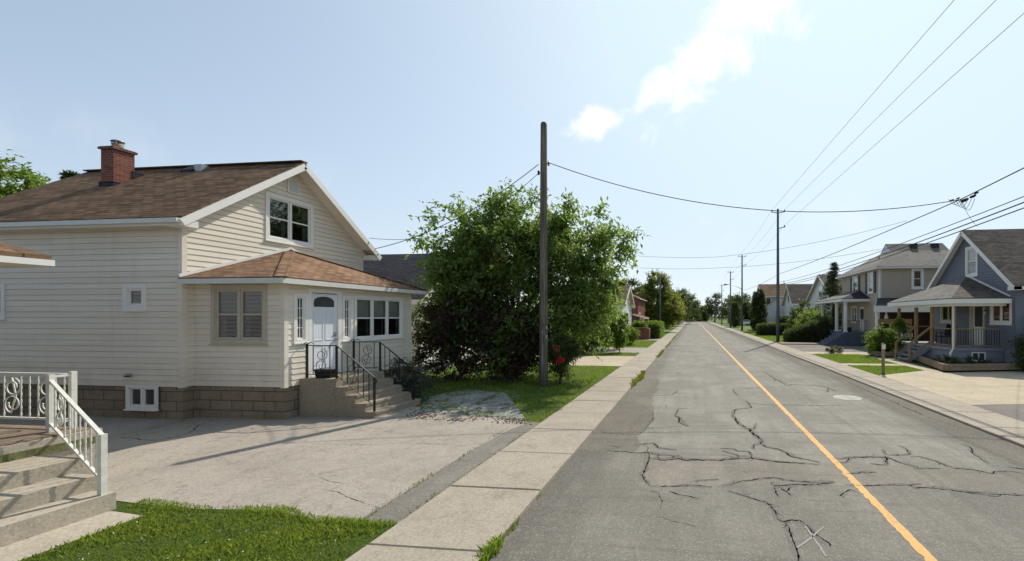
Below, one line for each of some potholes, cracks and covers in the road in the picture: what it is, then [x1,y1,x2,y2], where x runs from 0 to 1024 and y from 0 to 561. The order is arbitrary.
crack [603,373,980,527]
crack [777,518,831,561]
crack [839,443,1024,497]
